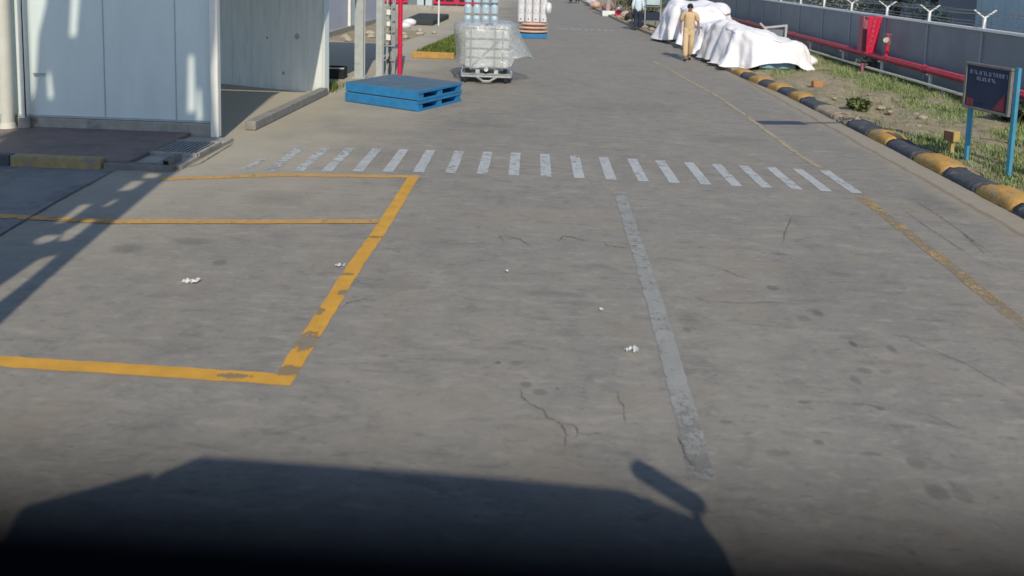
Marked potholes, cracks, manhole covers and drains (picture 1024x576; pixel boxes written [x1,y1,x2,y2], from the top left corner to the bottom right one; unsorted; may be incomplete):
crack [521,387,592,452]
drain grate [149,139,221,157]
